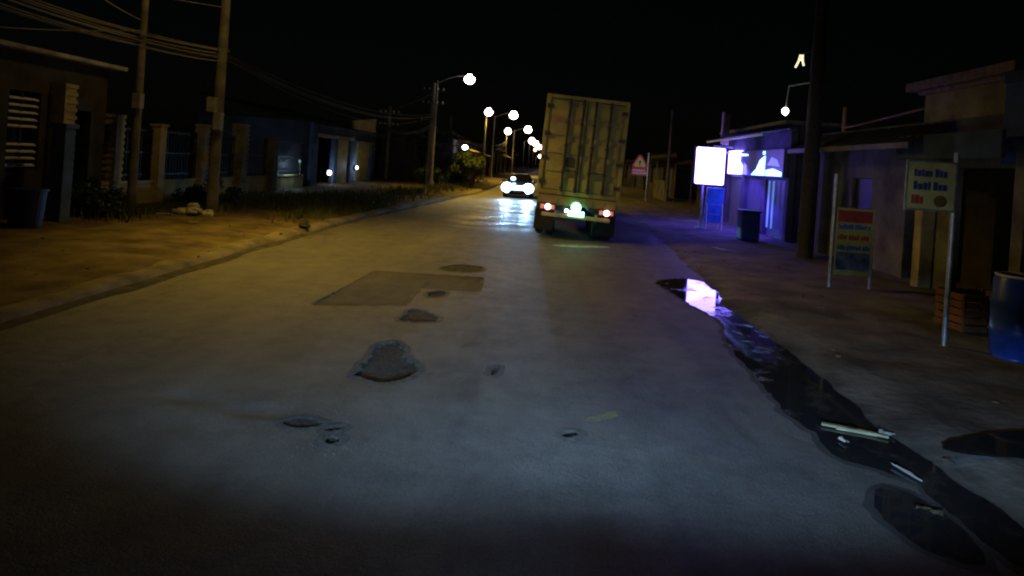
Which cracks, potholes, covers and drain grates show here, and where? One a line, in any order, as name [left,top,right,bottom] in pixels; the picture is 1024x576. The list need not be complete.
pothole [259,405,361,441]
pothole [553,427,587,442]
pothole [423,290,450,298]
pothole [281,425,379,459]
pothole [483,364,505,378]
pothole [308,340,445,391]
pothole [437,264,487,273]
pothole [390,308,444,324]
